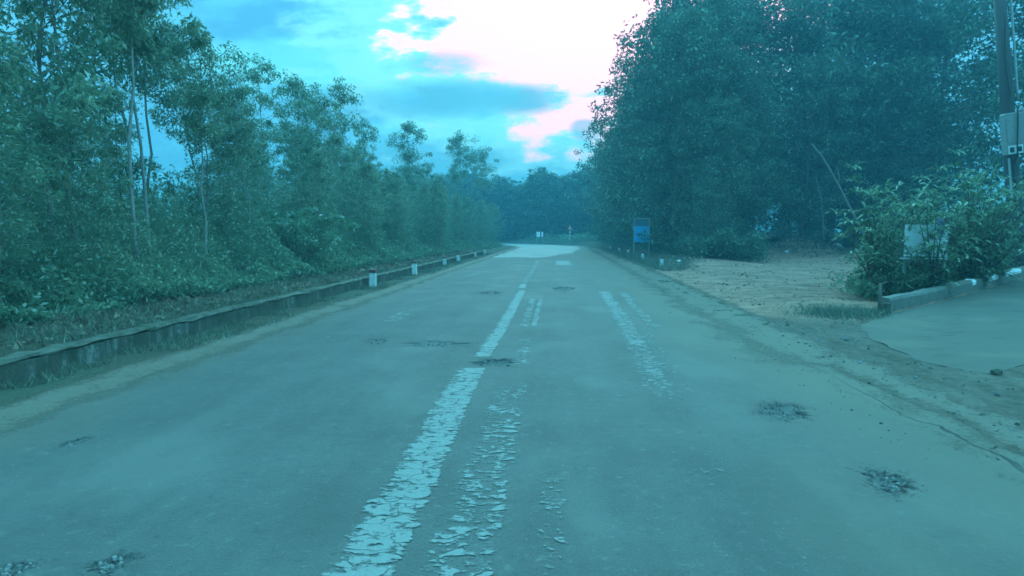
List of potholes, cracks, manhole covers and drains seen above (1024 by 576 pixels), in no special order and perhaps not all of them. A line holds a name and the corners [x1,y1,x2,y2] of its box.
pothole [60,437,91,447]
pothole [408,339,472,347]
pothole [0,562,39,576]
pothole [471,358,515,366]
pothole [860,469,924,494]
pothole [81,553,143,576]
crack [832,375,1024,473]
pothole [757,402,816,421]
